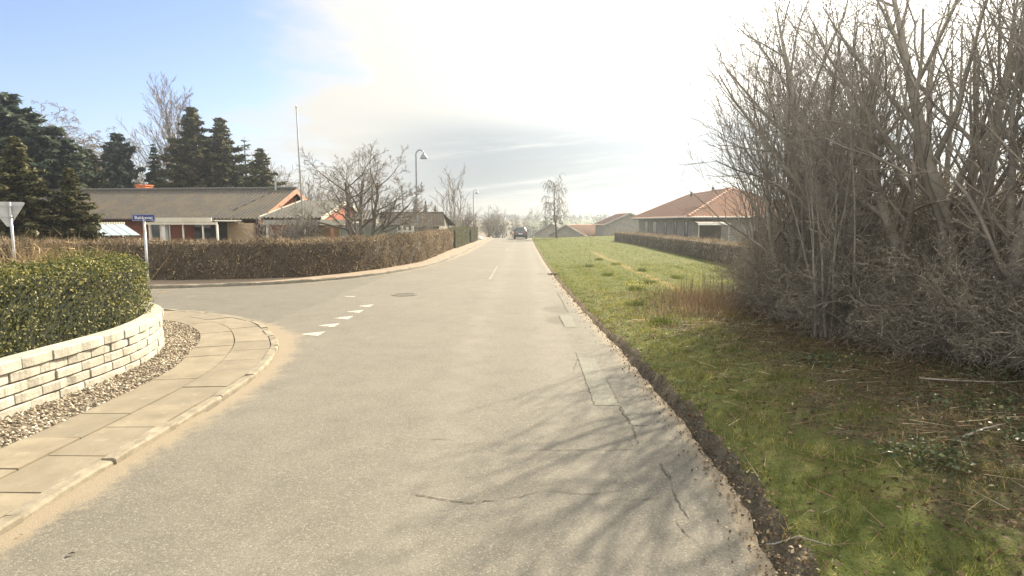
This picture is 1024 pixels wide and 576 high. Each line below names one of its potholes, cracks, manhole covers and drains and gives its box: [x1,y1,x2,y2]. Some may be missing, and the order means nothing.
crack [412,489,667,503]
crack [660,463,702,548]
crack [539,352,639,450]
